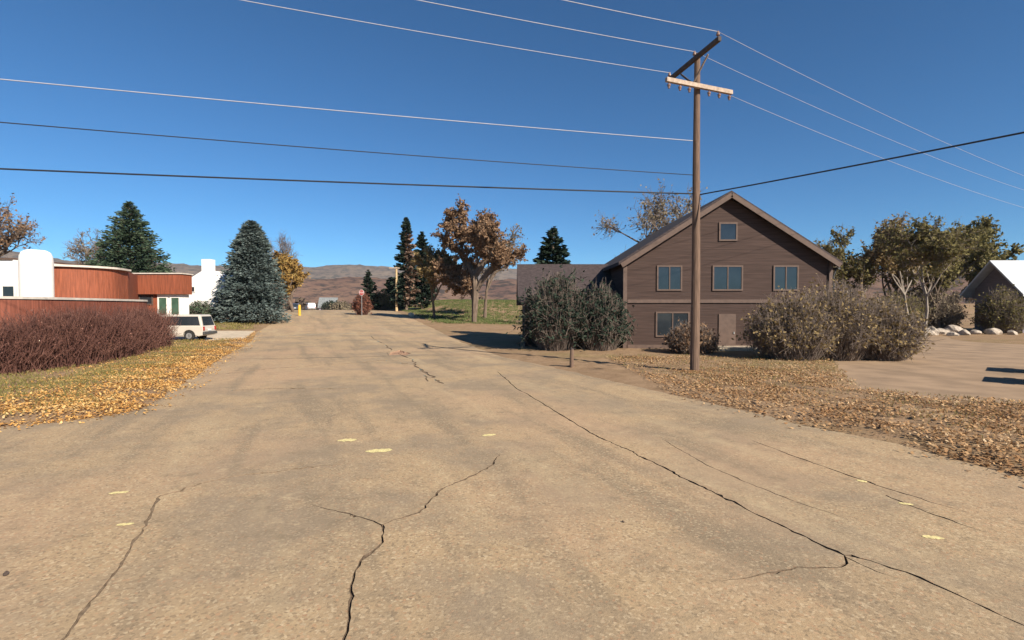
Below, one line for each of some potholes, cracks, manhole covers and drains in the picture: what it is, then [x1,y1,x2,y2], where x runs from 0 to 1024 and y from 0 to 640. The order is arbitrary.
crack [61,464,337,640]
crack [498,372,1024,626]
crack [310,456,498,640]
crack [226,333,444,390]
